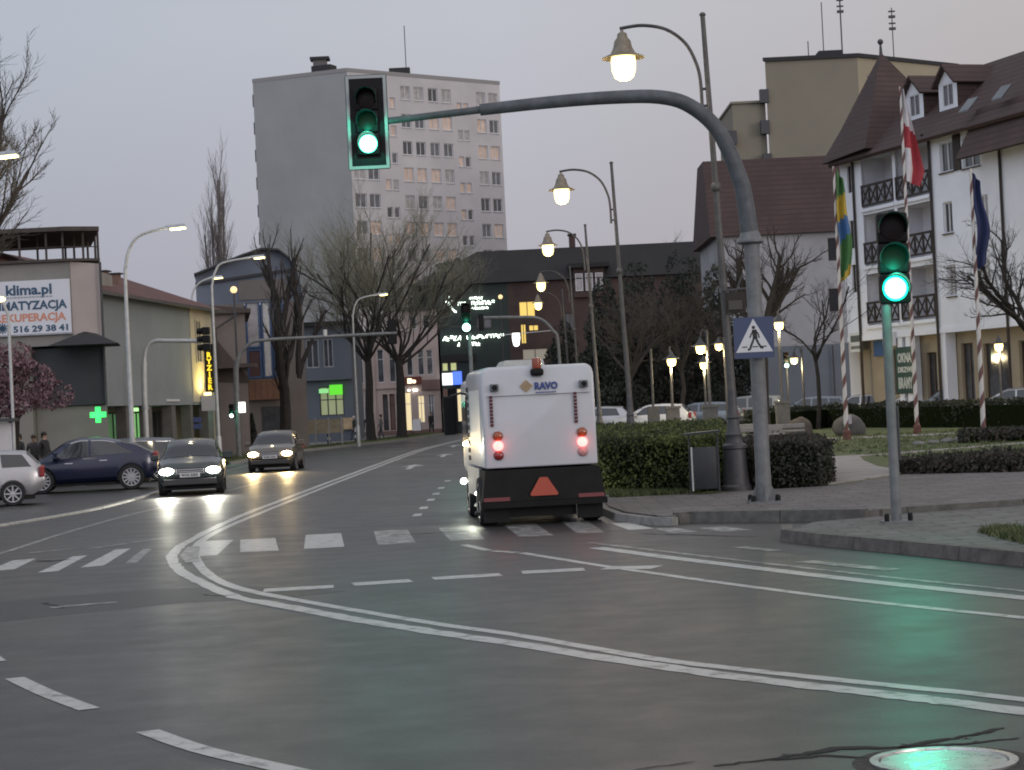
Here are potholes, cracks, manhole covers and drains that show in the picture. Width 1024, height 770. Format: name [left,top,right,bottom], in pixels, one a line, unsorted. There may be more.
crack [713,727,1019,766]
manhole cover [852,746,1024,770]
